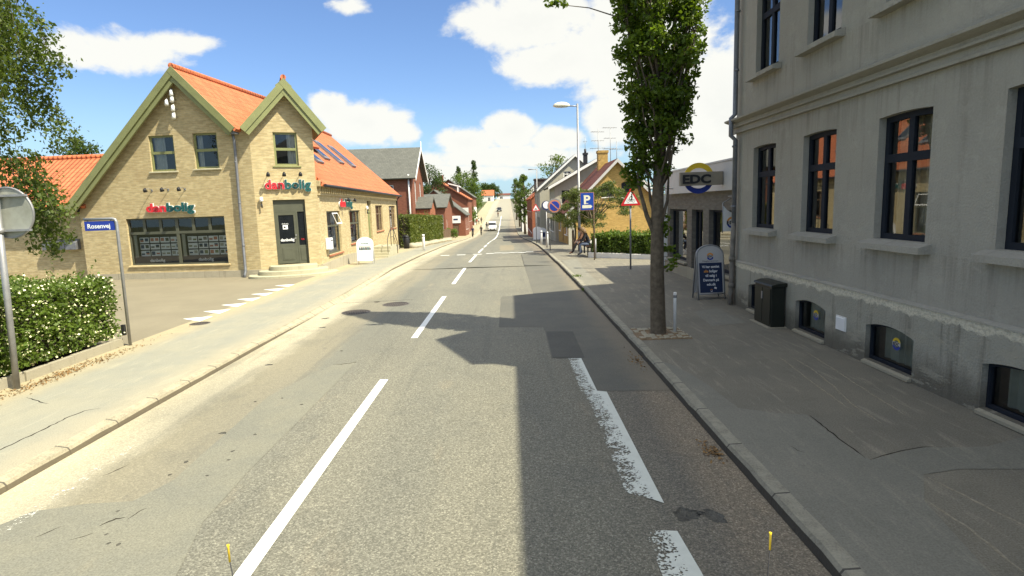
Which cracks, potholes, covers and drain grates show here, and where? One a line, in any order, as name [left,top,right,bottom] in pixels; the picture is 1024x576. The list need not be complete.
crack [37,508,146,540]
crack [0,398,98,450]
pothole [673,506,702,522]
crack [780,349,922,459]
